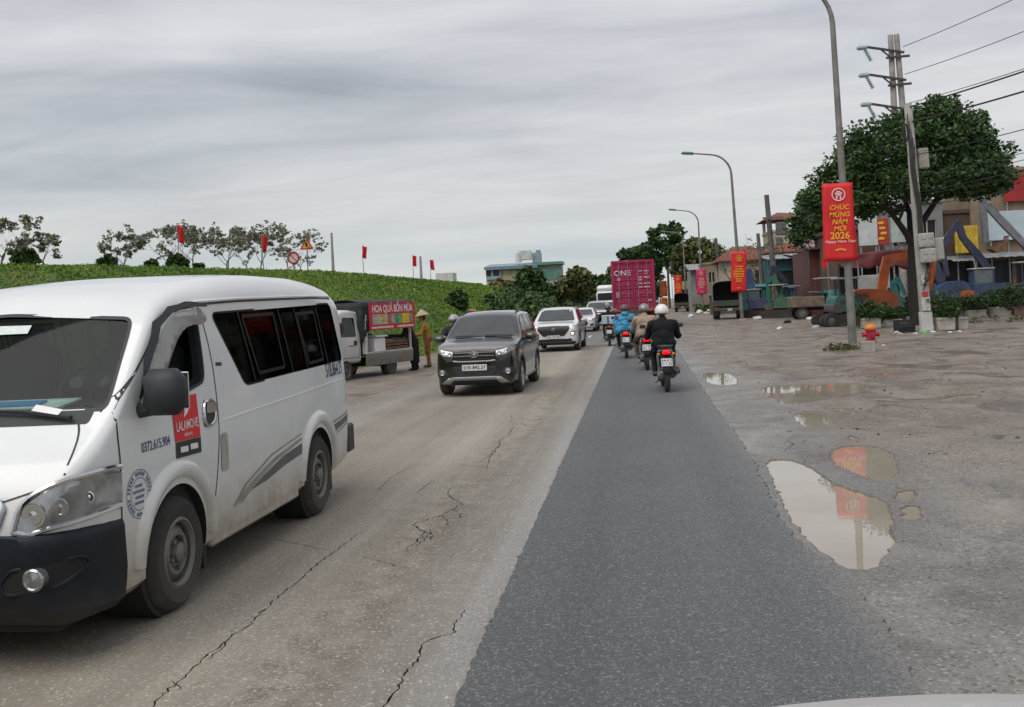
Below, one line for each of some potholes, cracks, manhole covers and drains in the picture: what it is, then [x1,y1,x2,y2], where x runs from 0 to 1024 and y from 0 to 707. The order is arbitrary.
pothole [792,411,836,427]
pothole [828,445,900,481]
pothole [761,383,869,404]
pothole [766,459,897,569]
pothole [703,372,738,385]
pothole [893,490,918,501]
crack [153,532,361,707]
crack [383,610,465,707]
crack [362,485,485,569]
pothole [899,505,925,520]
